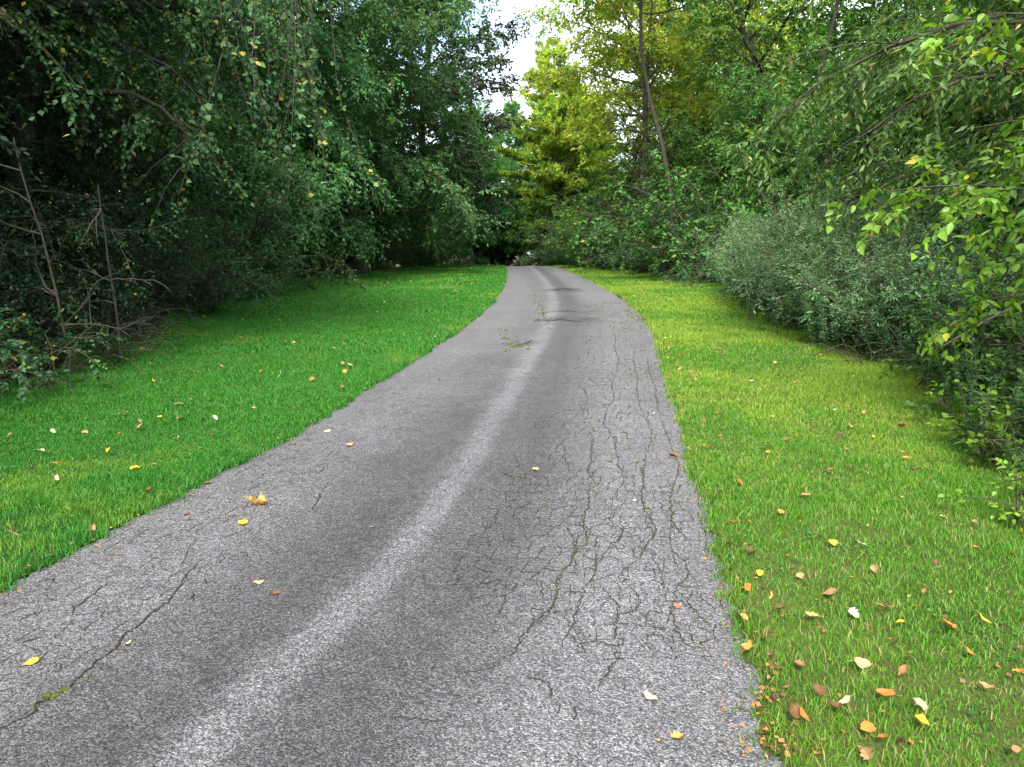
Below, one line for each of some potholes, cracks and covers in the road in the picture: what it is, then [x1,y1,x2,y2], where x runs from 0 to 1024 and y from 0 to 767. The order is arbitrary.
crack [0,369,448,729]
crack [522,674,578,720]
